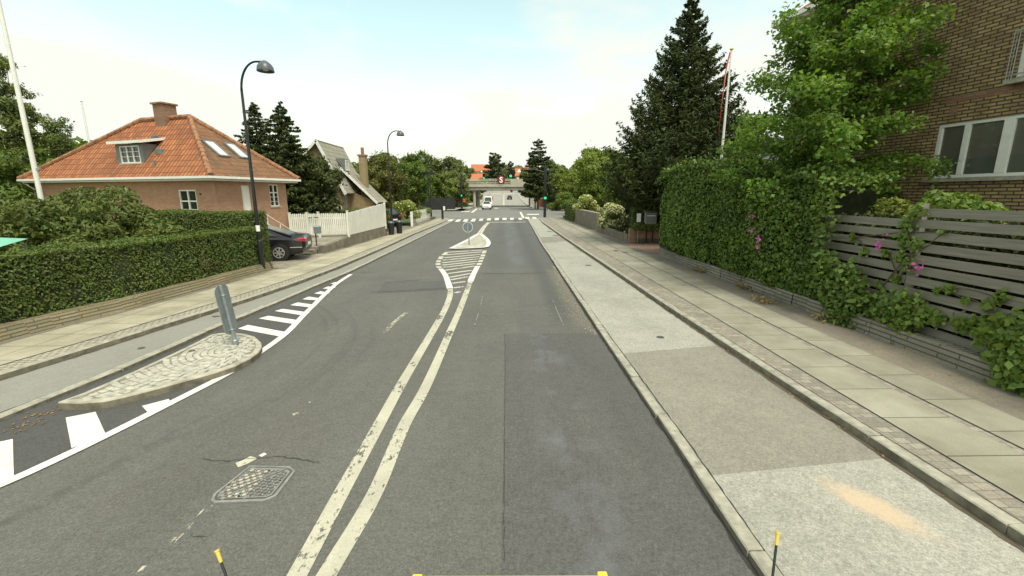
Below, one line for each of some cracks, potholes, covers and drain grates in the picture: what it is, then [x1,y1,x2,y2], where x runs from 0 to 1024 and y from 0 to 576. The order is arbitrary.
manhole cover [211,465,296,504]
